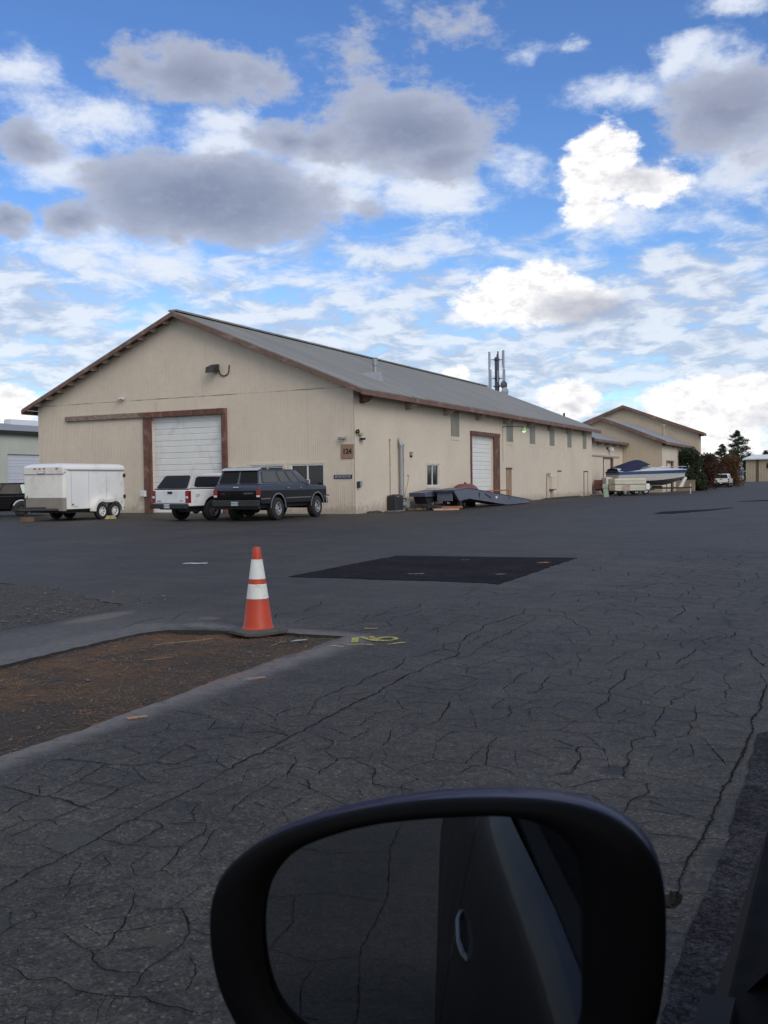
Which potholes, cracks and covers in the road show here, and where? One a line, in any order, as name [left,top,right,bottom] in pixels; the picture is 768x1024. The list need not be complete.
crack [0,610,668,1024]
crack [363,550,768,984]
pothole [665,891,683,909]
